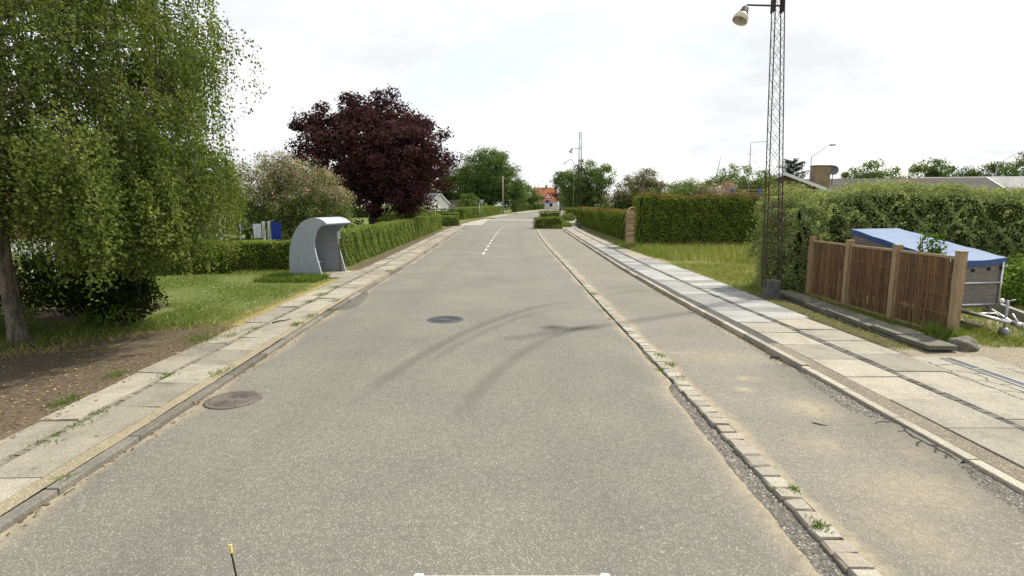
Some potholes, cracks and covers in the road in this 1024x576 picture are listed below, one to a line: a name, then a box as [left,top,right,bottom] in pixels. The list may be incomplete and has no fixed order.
crack [875,421,957,460]
manhole cover [204,390,263,410]
